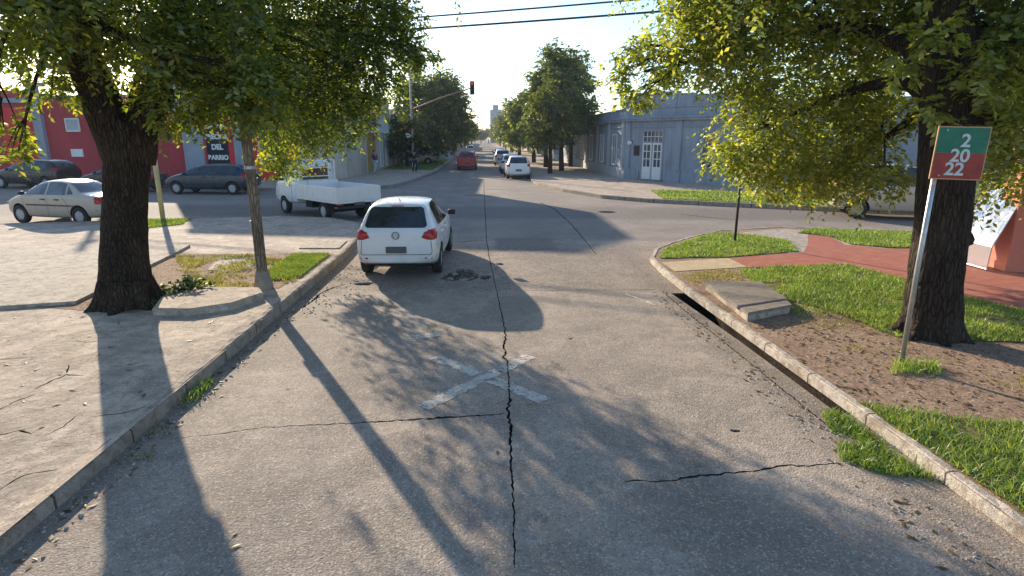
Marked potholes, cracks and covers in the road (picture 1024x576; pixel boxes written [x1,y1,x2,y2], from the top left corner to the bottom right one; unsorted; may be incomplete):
pothole [438,269,479,281]
crack [173,189,516,567]
crack [624,463,836,483]
crack [1,365,84,409]
drain grate [672,293,850,414]
